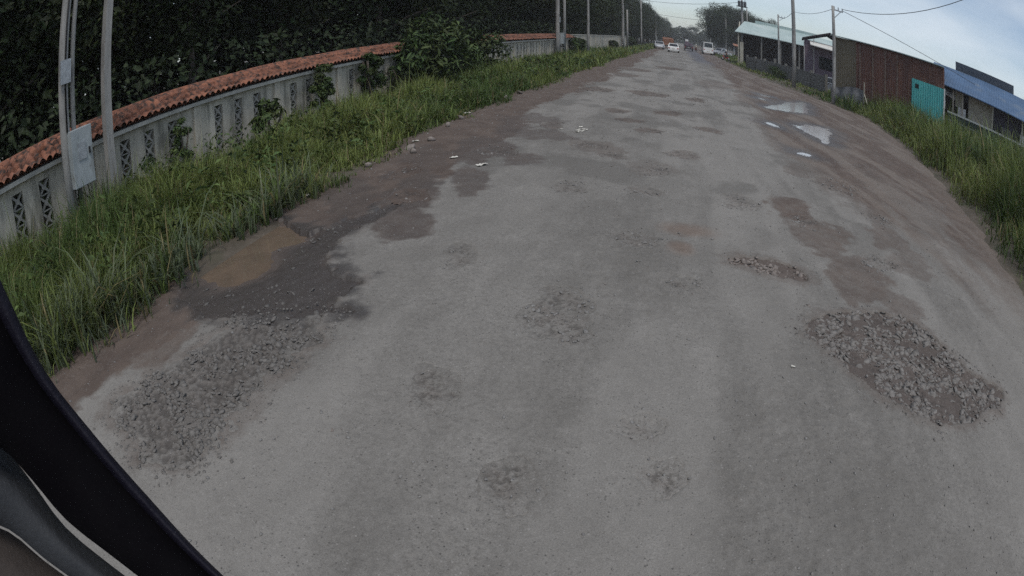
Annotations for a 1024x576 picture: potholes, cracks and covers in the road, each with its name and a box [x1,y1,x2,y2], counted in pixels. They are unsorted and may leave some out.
pothole [464,456,548,528]
pothole [727,256,812,282]
pothole [431,242,485,273]
pothole [610,402,667,457]
pothole [626,441,688,508]
pothole [93,302,352,487]
pothole [408,362,483,422]
pothole [514,280,600,347]
pothole [785,303,1011,441]
